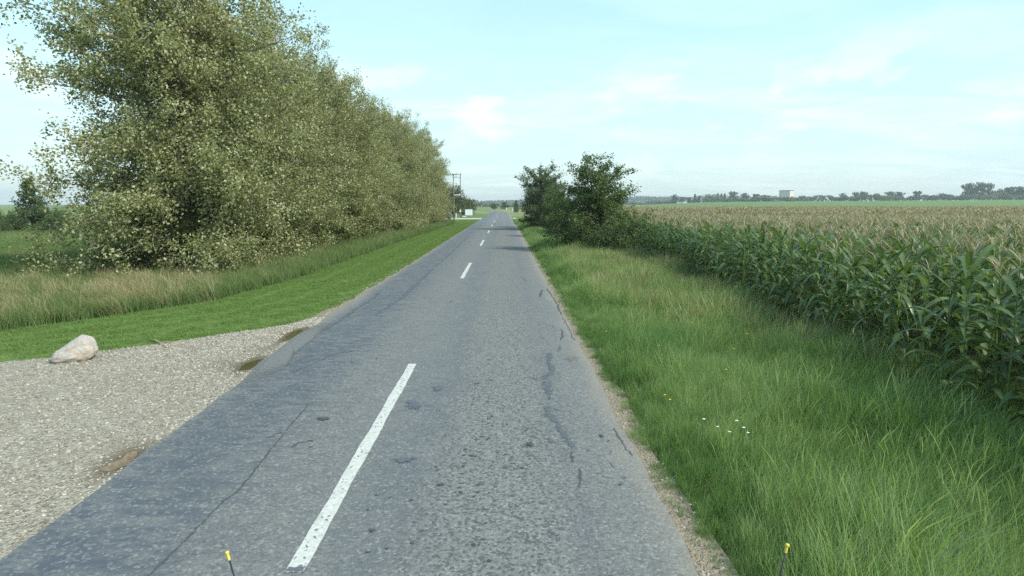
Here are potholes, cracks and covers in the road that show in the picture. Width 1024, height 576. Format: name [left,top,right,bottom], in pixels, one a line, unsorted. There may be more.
crack [521,277,574,352]
pothole [237,358,265,371]
pothole [284,328,305,341]
pothole [99,450,137,472]
crack [147,404,312,576]
crack [528,376,582,486]
